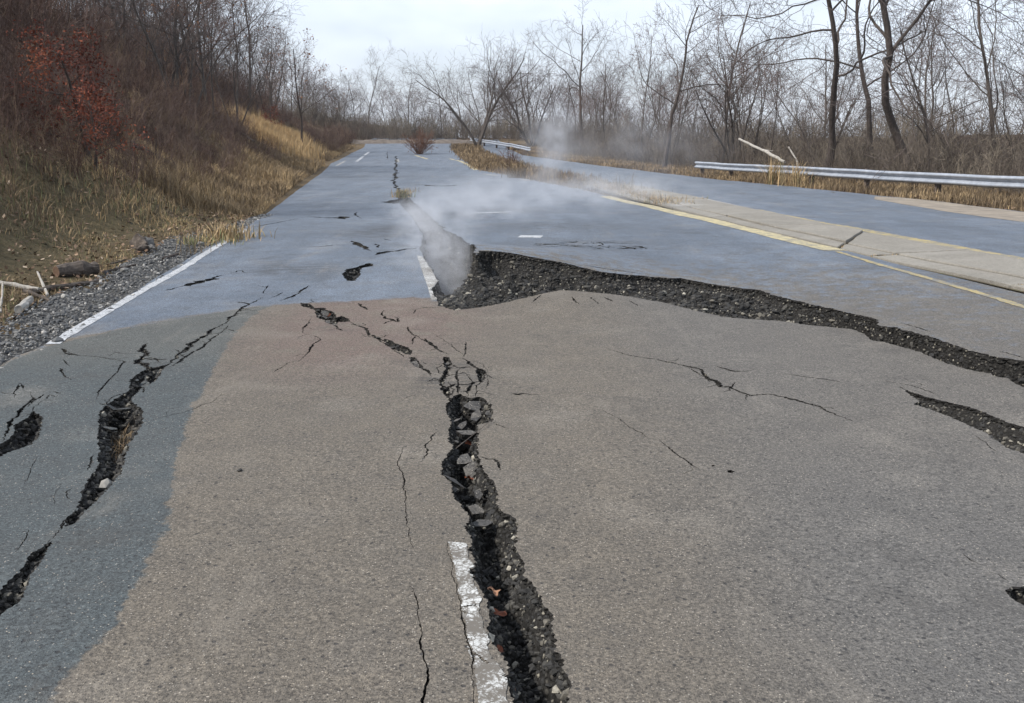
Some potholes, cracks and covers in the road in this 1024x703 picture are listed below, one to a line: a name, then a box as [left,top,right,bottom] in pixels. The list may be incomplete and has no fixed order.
crack [0,156,1024,703]
pothole [342,263,374,281]
